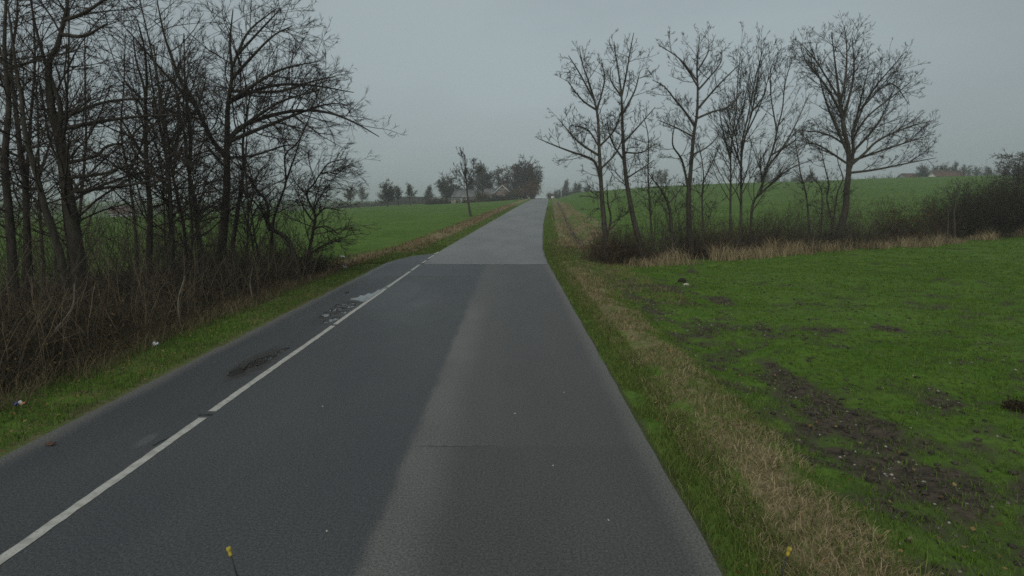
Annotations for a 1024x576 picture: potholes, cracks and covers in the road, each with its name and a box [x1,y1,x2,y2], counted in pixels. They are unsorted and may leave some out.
pothole [243,355,277,370]
